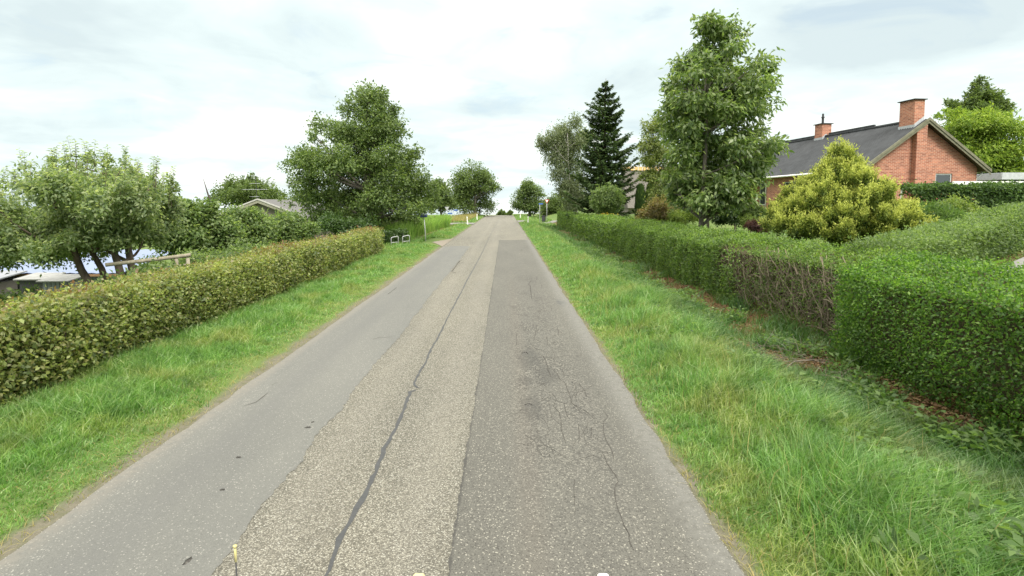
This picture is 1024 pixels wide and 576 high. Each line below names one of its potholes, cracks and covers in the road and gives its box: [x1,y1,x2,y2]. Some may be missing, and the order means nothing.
crack [512,249,661,550]
